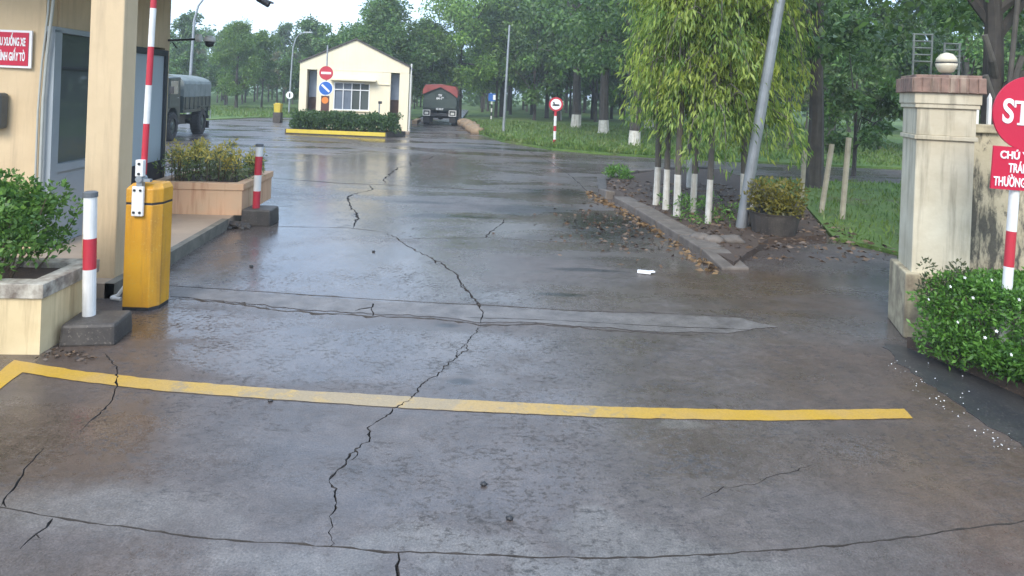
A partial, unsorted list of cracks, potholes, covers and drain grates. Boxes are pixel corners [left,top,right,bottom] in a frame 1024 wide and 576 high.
crack [1,448,53,549]
crack [701,465,811,499]
crack [175,233,704,547]
crack [346,155,438,228]
crack [86,354,118,425]
